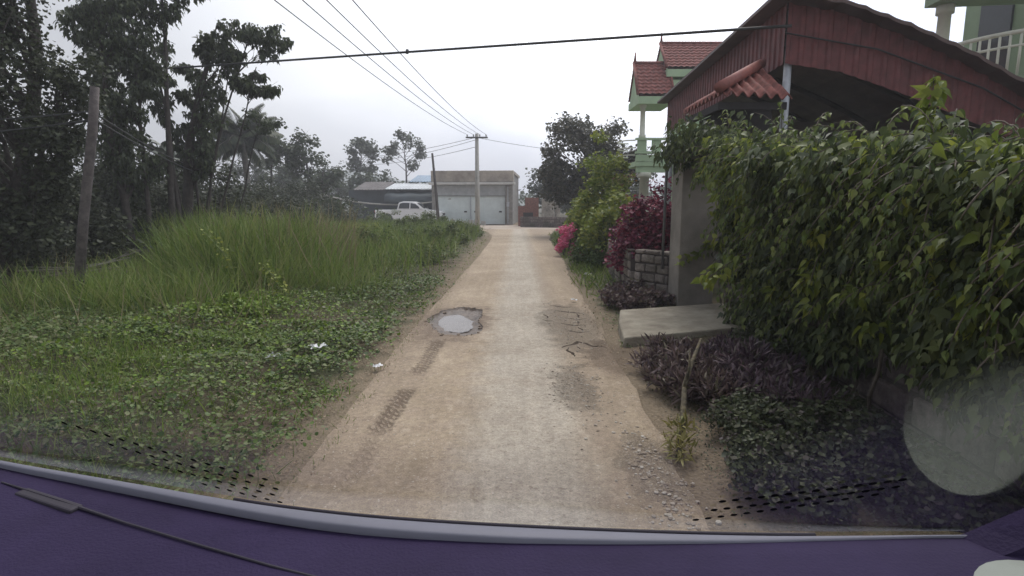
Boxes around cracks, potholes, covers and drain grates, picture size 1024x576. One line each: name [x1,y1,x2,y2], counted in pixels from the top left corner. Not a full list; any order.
pothole [425,307,485,336]
crack [543,305,603,357]
